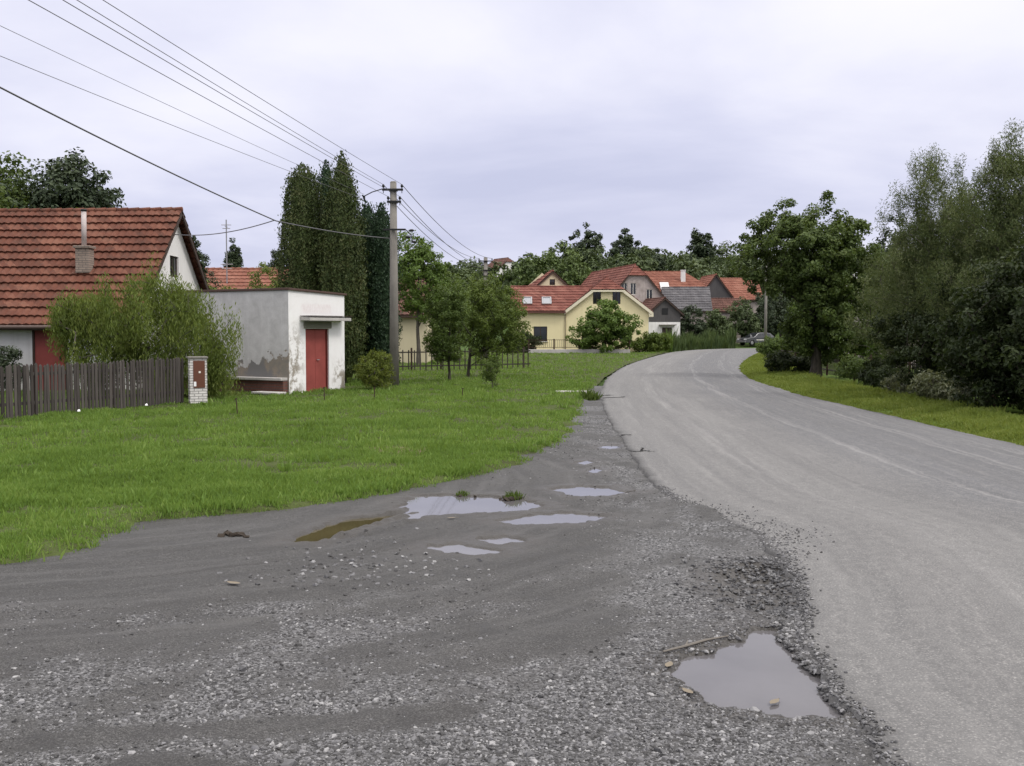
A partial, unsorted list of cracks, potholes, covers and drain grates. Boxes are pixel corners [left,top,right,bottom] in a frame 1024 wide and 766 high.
pothole [393,492,555,519]
pothole [471,534,531,545]
pothole [543,484,636,497]
pothole [491,510,613,525]
pothole [653,624,853,720]
pothole [275,509,404,542]
pothole [419,540,507,556]
